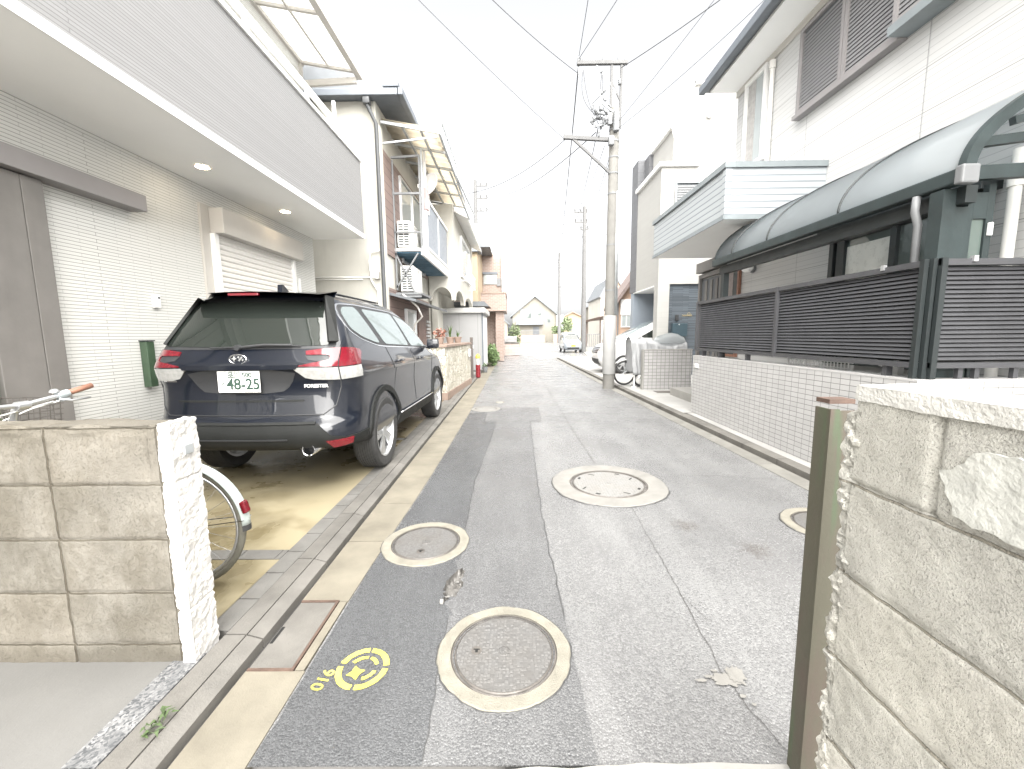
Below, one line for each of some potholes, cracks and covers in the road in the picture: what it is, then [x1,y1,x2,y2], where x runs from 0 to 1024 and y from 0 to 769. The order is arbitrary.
crack [633,510,783,747]
pothole [440,567,465,604]
manhole cover [435,606,572,715]
manhole cover [380,522,470,568]
manhole cover [779,508,807,535]
manhole cover [551,465,670,508]
